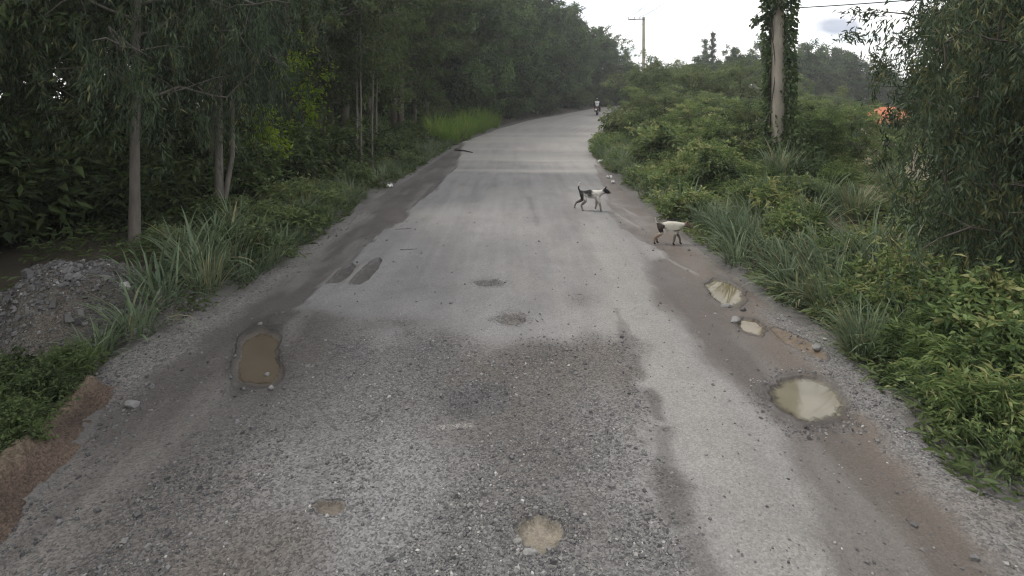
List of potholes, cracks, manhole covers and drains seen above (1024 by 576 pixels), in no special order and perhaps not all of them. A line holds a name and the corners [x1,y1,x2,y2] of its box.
pothole [766,325,835,364]
pothole [701,276,749,311]
pothole [229,323,288,393]
pothole [762,374,855,428]
pothole [735,316,769,338]
